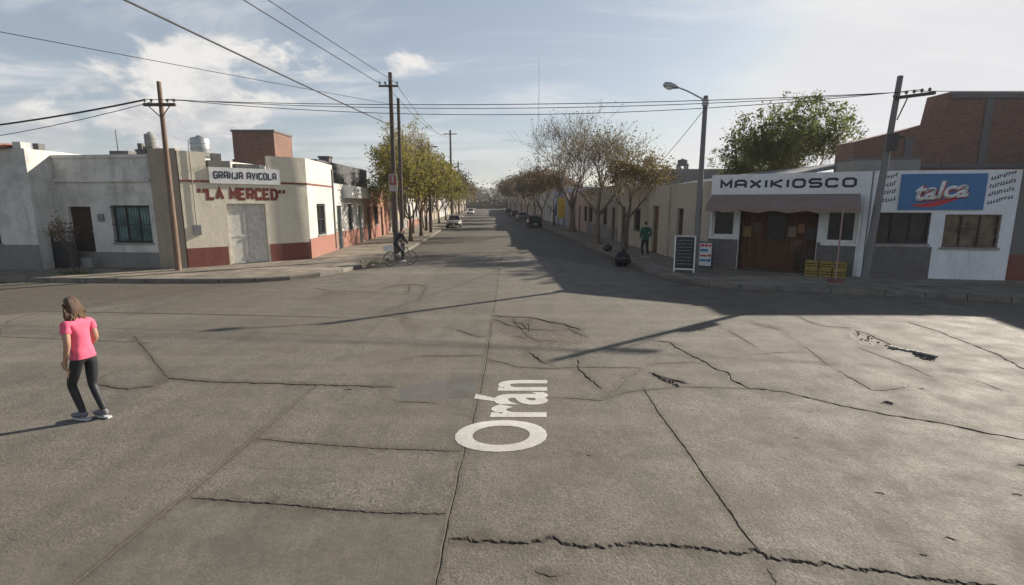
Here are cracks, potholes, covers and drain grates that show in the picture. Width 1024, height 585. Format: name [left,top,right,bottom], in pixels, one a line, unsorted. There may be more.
pothole [849,329,898,351]
crack [448,535,996,585]
pothole [888,345,938,361]
pothole [650,372,688,387]
crack [492,315,1024,440]
